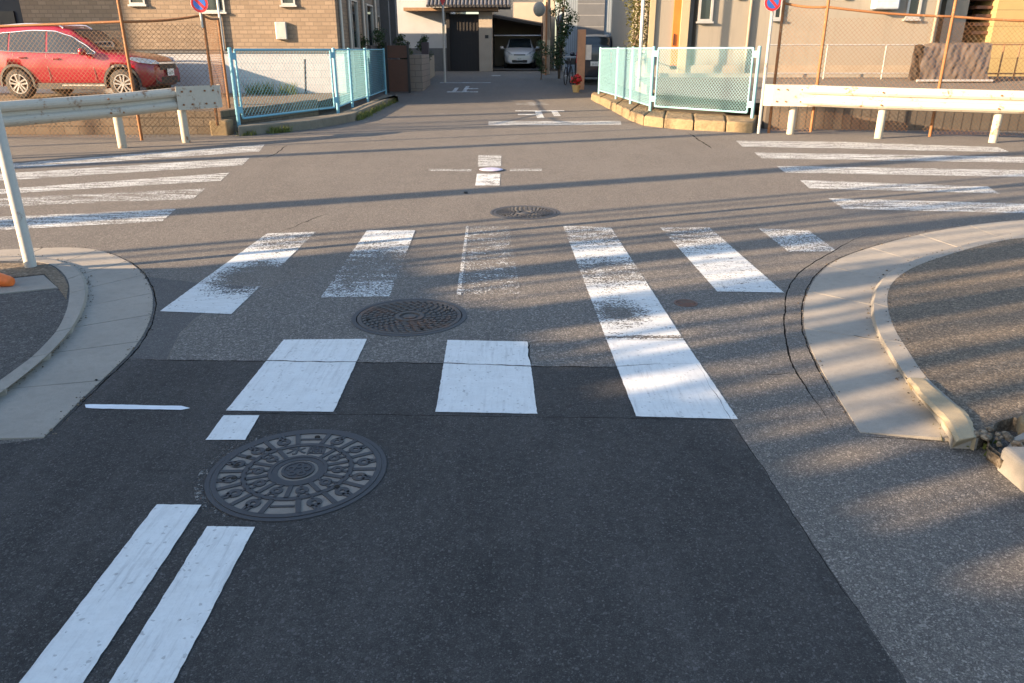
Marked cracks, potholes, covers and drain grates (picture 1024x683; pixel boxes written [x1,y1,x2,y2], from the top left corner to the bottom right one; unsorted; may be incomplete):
utility cover [674,299,698,307]
manhole cover [194,429,387,522]
manhole cover [490,205,560,220]
manhole cover [351,298,467,337]
